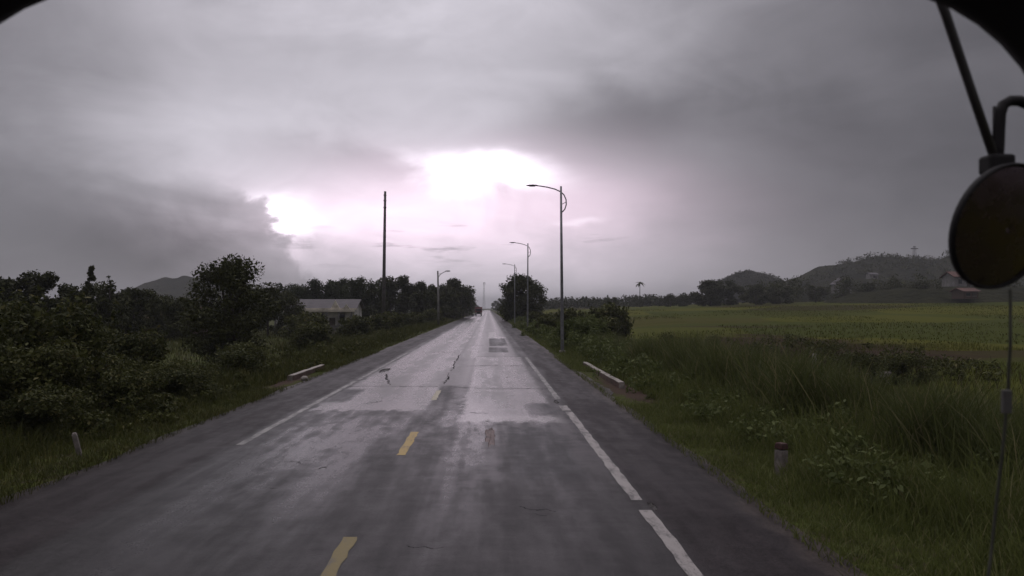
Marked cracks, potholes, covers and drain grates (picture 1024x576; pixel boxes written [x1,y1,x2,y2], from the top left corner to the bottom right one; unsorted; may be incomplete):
crack [349,374,438,404]
pothole [485,428,495,447]
